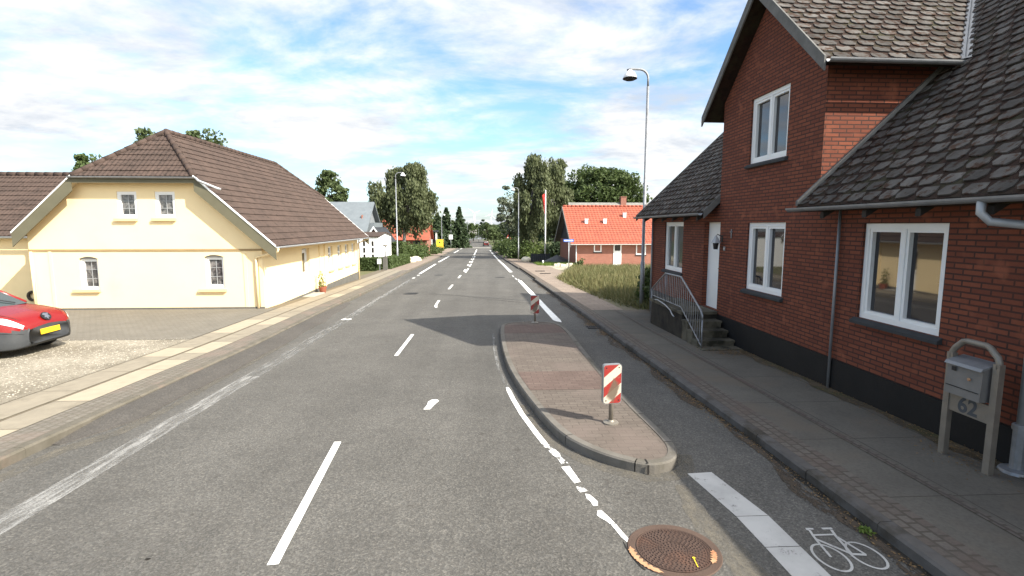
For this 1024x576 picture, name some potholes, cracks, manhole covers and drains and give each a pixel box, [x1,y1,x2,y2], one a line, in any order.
manhole cover [627,525,723,576]
